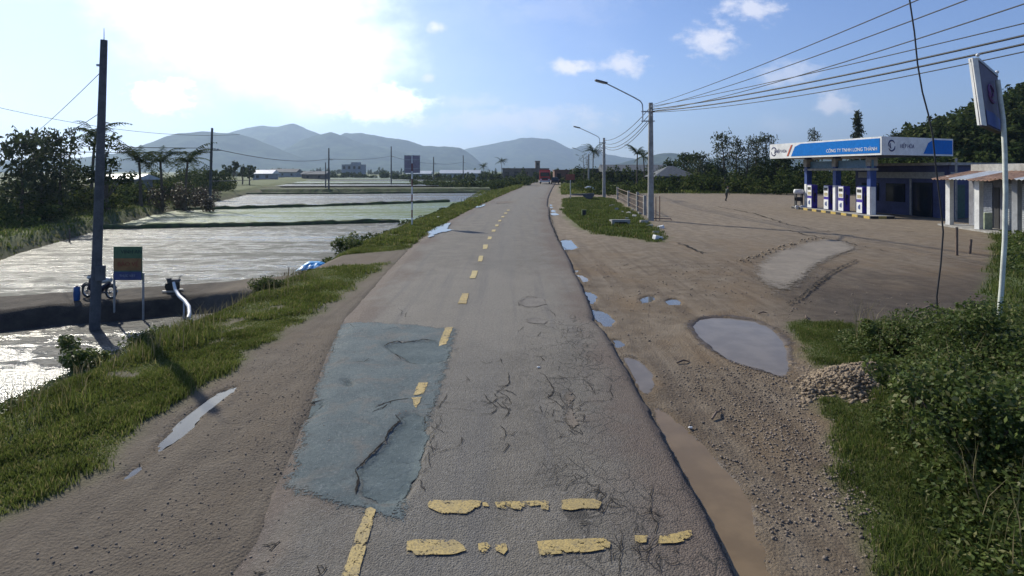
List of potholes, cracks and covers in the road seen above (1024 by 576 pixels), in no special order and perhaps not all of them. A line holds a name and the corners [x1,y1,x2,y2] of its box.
pothole [155,387,237,452]
pothole [624,354,658,394]
crack [355,398,409,492]
pothole [428,223,451,237]
crack [518,296,683,576]
pothole [520,297,547,307]
pothole [684,314,795,377]
pothole [652,407,773,576]
pothole [561,239,578,251]
pothole [592,308,615,327]
